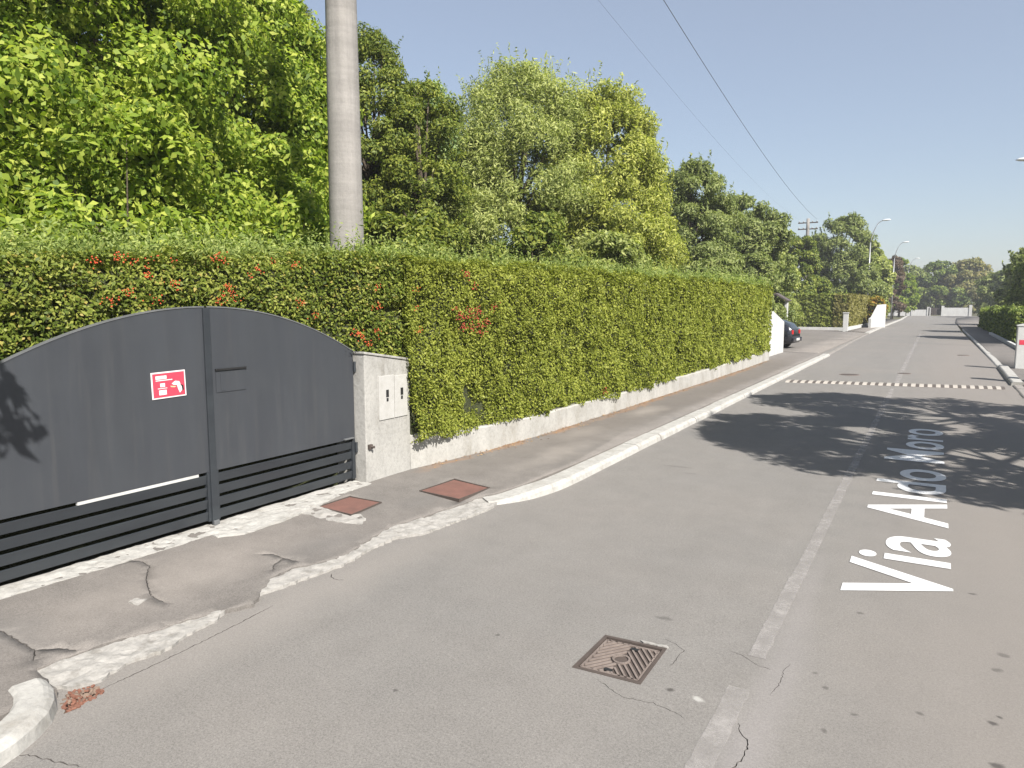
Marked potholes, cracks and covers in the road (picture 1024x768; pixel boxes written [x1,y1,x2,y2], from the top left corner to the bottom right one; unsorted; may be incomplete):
manhole cover [419,479,490,502]
manhole cover [320,496,382,516]
crack [105,607,270,688]
crack [2,631,76,660]
crack [131,560,164,603]
crack [732,723,749,768]
crack [19,754,79,767]
